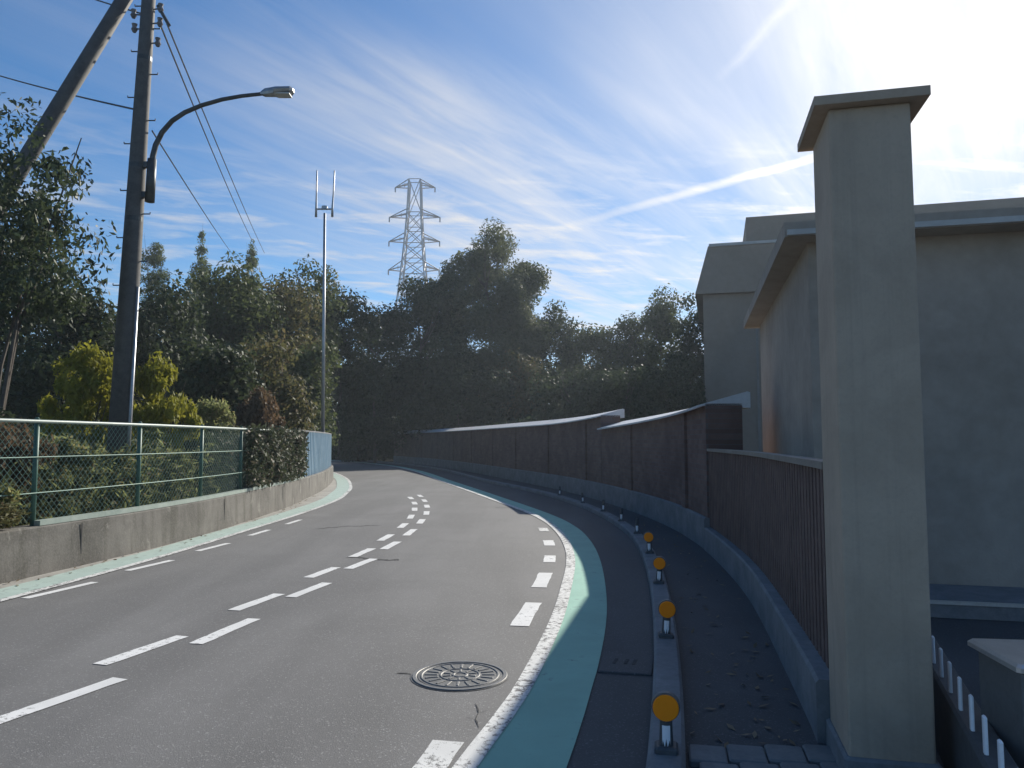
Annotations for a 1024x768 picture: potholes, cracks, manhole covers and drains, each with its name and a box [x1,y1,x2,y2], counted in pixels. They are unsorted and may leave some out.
manhole cover [410,661,509,691]
